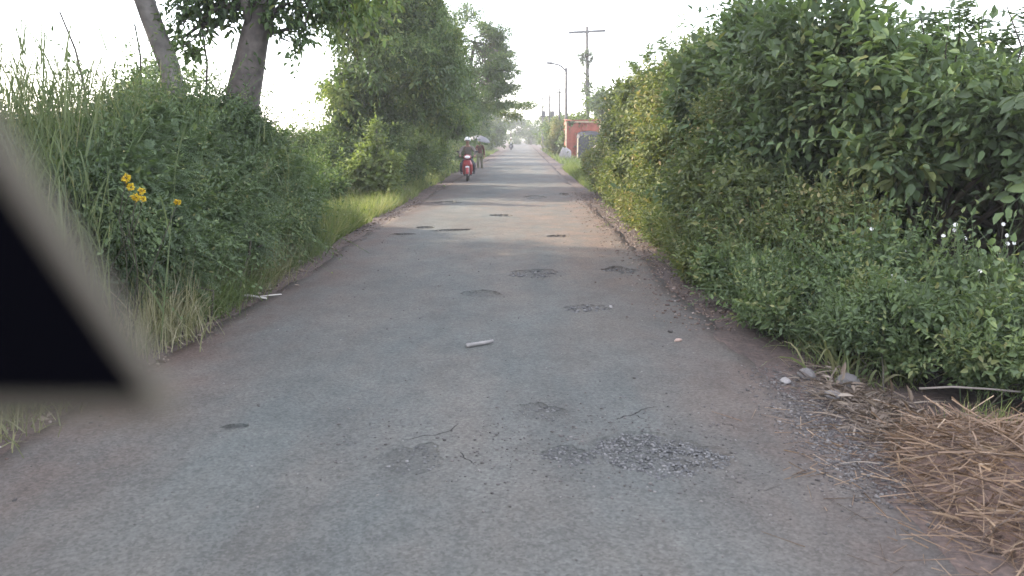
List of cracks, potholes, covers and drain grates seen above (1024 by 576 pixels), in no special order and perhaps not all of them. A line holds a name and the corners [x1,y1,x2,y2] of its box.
pothole [601,266,640,274]
pothole [370,442,444,476]
pothole [513,402,570,423]
pothole [508,269,560,279]
pothole [563,304,613,313]
pothole [586,430,738,480]
pothole [538,444,599,466]
pothole [461,289,503,298]
